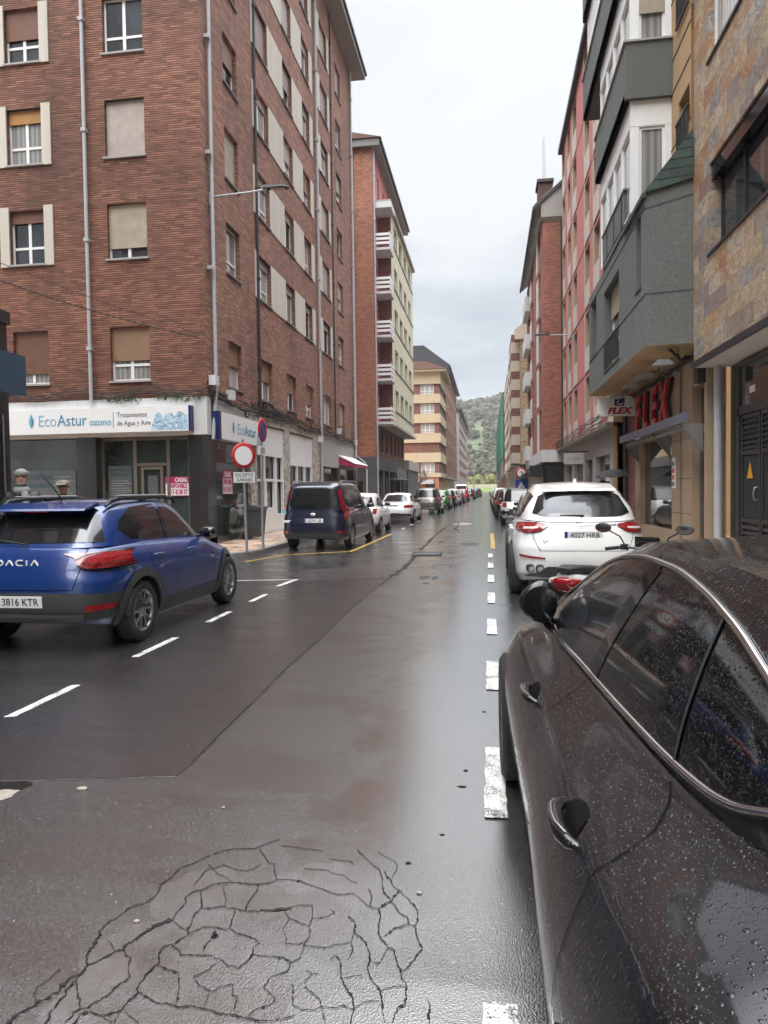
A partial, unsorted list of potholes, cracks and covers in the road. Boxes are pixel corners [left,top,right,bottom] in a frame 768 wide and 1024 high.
crack [6,839,423,1024]
